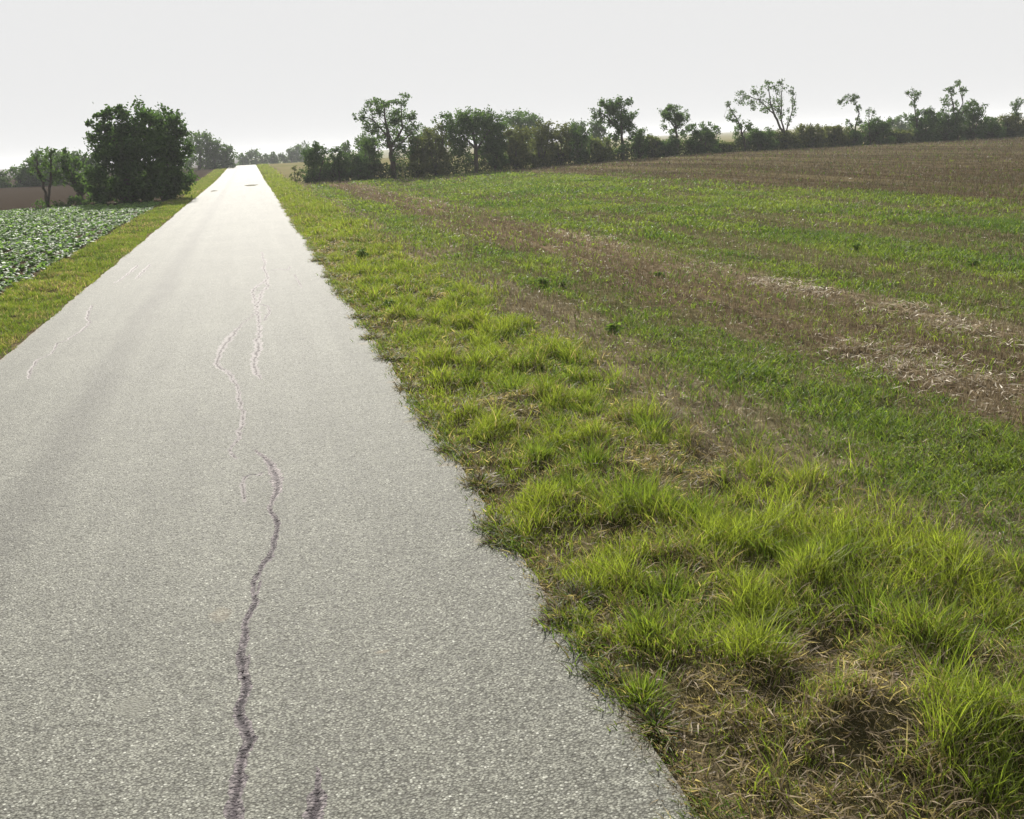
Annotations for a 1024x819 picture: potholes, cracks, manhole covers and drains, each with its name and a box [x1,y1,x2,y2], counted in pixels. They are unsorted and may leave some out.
crack [26,305,93,379]
crack [213,252,302,819]
crack [114,264,151,283]
crack [301,766,328,819]
